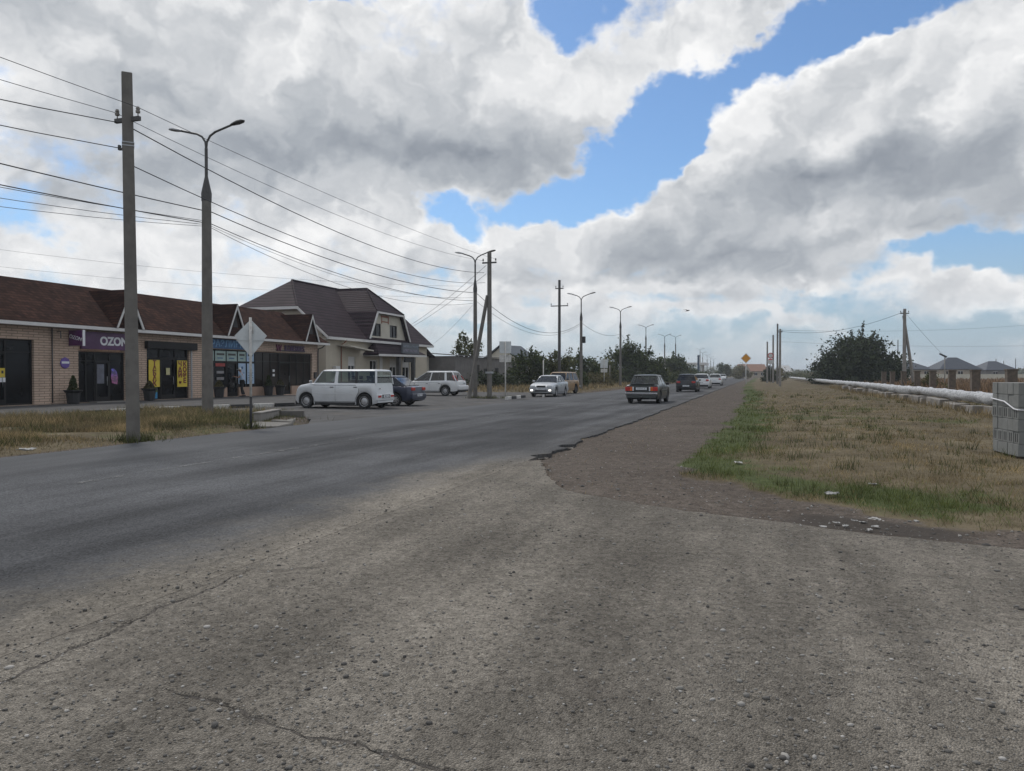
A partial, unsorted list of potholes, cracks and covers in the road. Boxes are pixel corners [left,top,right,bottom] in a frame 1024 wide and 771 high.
crack [158,686,462,771]
